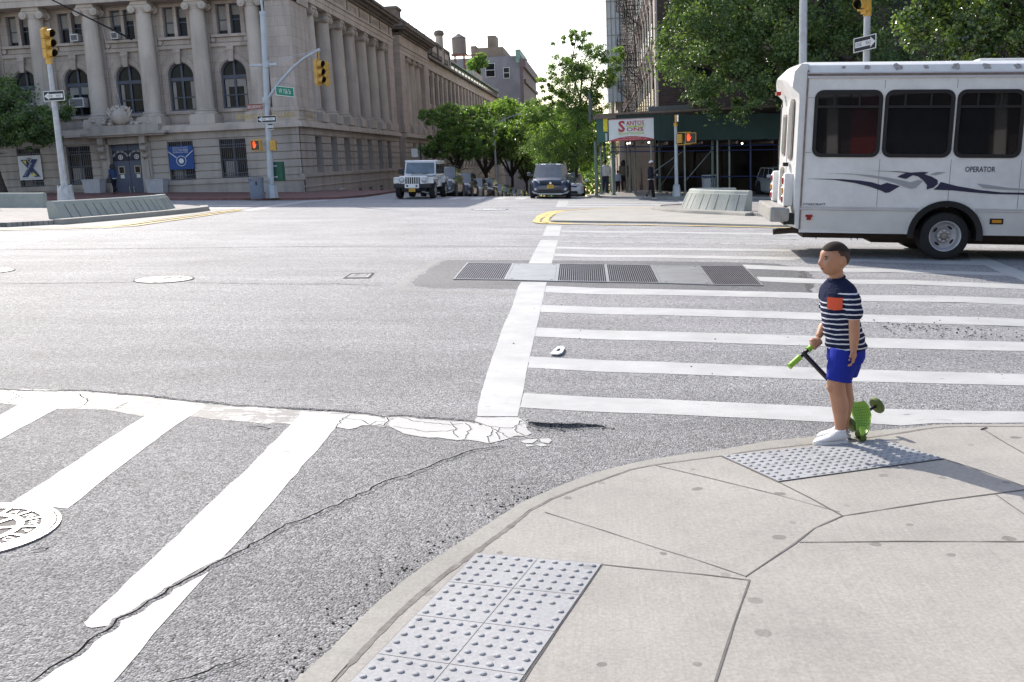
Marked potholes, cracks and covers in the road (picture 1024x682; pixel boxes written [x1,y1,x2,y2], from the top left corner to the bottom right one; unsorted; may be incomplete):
pothole [520,420,615,433]
manhole cover [0,502,62,553]
drain grate [556,264,608,283]
crack [25,425,505,682]
drain grate [453,262,513,280]
drain grate [606,264,660,284]
manhole cover [133,275,195,283]
